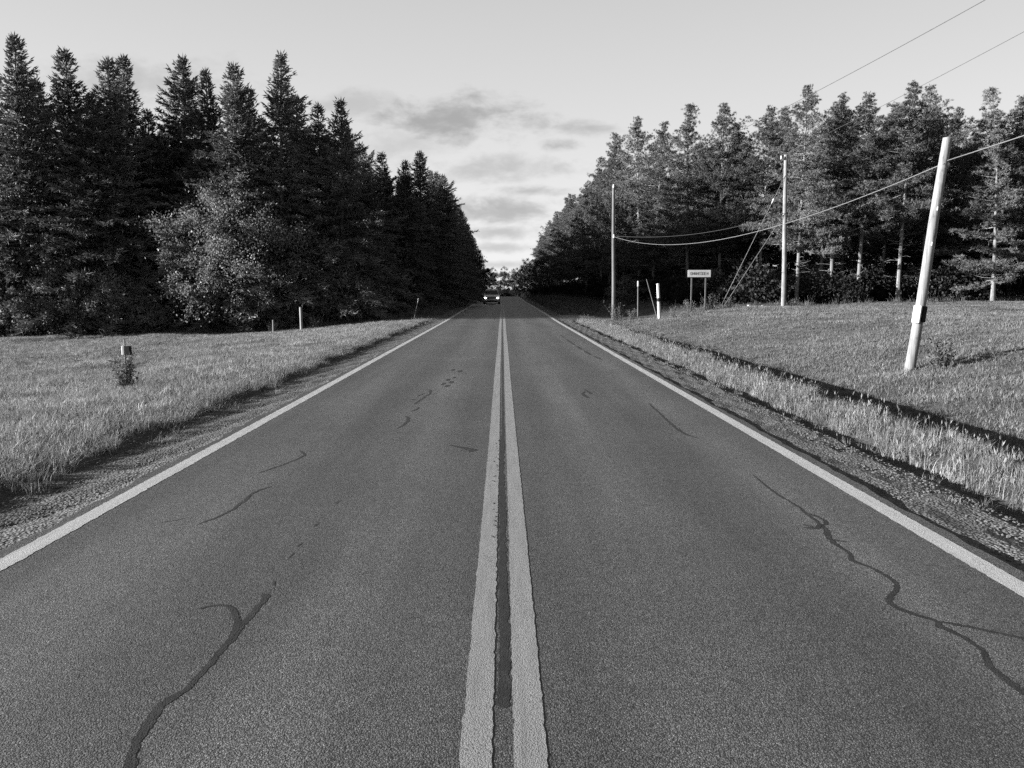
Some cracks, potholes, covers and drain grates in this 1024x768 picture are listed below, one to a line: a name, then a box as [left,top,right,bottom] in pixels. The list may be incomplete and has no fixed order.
crack [397,369,462,429]
